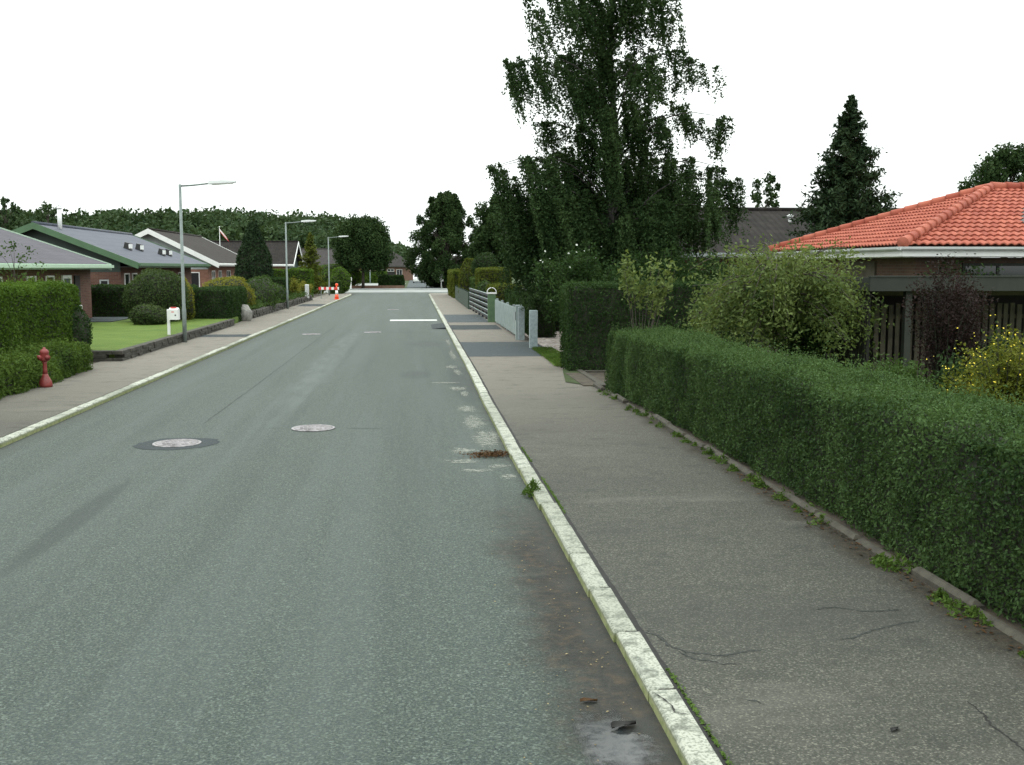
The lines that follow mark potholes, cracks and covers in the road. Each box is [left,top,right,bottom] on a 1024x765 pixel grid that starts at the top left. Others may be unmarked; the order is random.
crack [647,630,763,664]
manhole cover [291,424,335,432]
crack [970,703,1024,750]
manhole cover [133,438,220,450]
crack [816,607,919,639]
